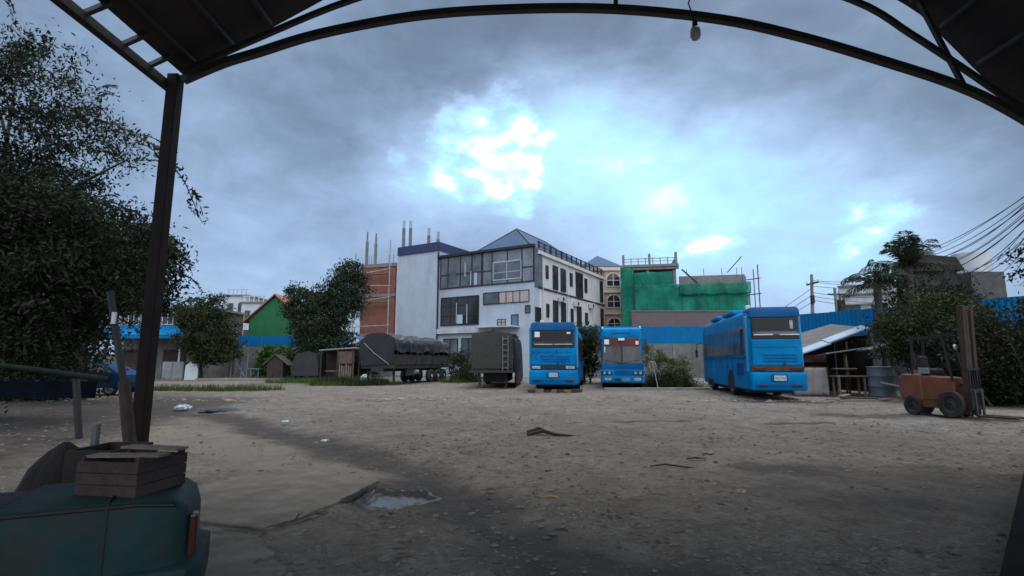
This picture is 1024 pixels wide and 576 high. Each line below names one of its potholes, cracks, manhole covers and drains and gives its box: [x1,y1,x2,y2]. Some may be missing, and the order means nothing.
pothole [352,488,442,511]
crack [266,481,379,528]
